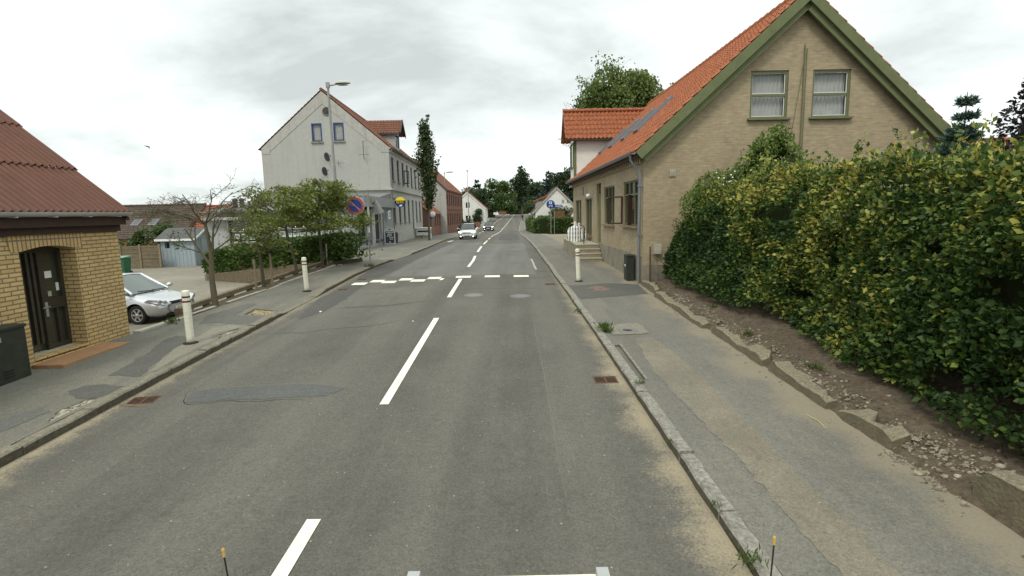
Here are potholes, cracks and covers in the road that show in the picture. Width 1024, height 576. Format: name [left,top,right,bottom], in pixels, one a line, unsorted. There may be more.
drain grate [593,376,619,384]
drain grate [126,395,162,405]
